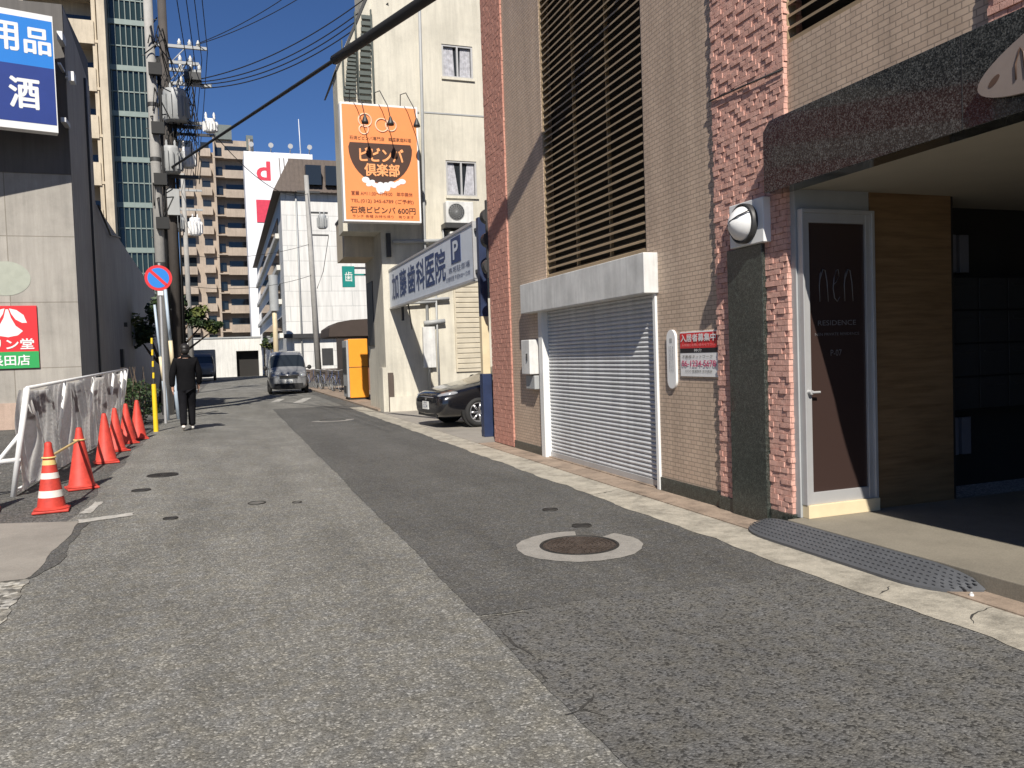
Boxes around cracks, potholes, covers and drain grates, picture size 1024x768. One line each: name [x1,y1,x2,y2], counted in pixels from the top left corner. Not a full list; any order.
crack [501,630,548,683]
crack [565,693,606,716]
manhole cover [516,531,643,562]
